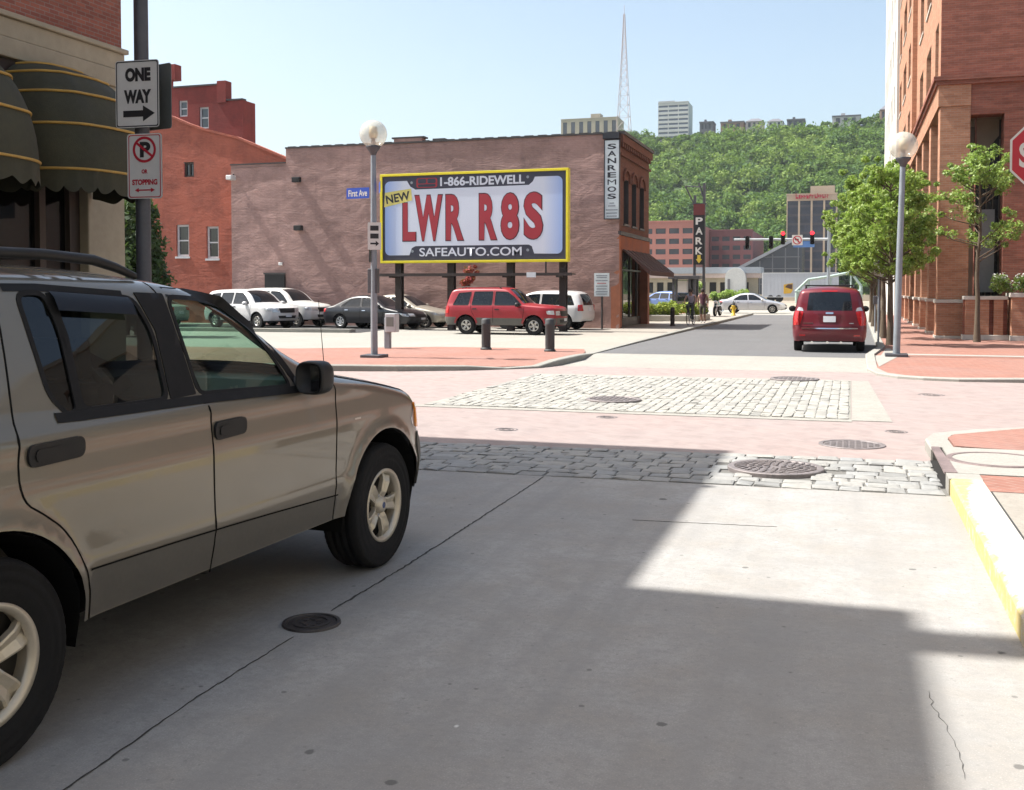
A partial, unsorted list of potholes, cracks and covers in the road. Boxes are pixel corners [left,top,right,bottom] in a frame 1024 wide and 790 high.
manhole cover [727,459,825,479]
crack [929,693,965,776]
manhole cover [282,613,341,633]
